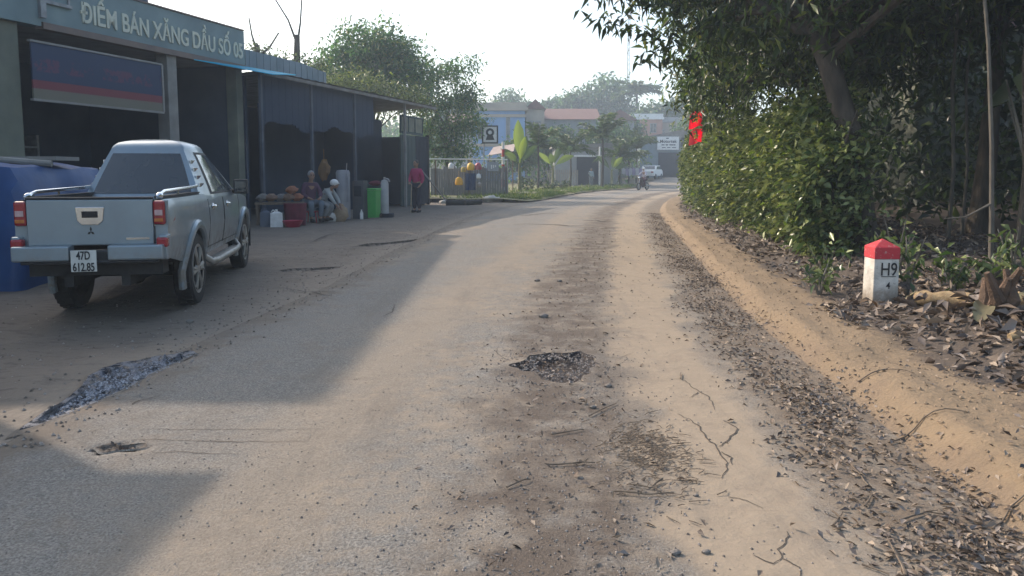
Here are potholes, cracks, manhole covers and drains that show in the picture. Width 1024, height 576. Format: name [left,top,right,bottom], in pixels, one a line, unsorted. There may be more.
crack [666,378,738,477]
pothole [333,234,460,250]
pothole [495,347,610,391]
crack [754,531,801,576]
pothole [93,441,151,455]
pothole [5,349,203,439]
